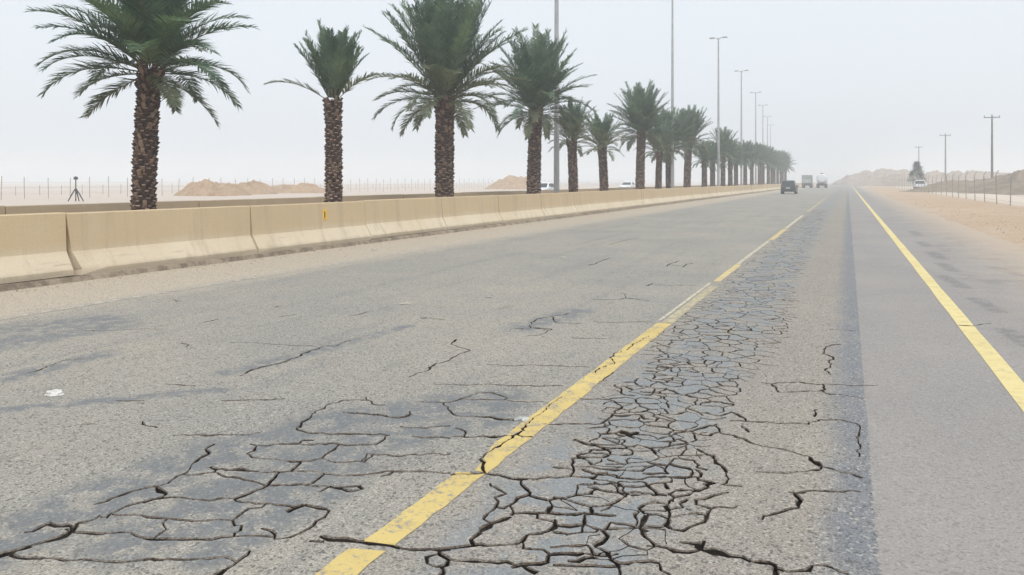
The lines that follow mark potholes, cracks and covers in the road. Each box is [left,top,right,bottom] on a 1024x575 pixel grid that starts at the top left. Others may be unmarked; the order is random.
crack [0,211,861,575]
